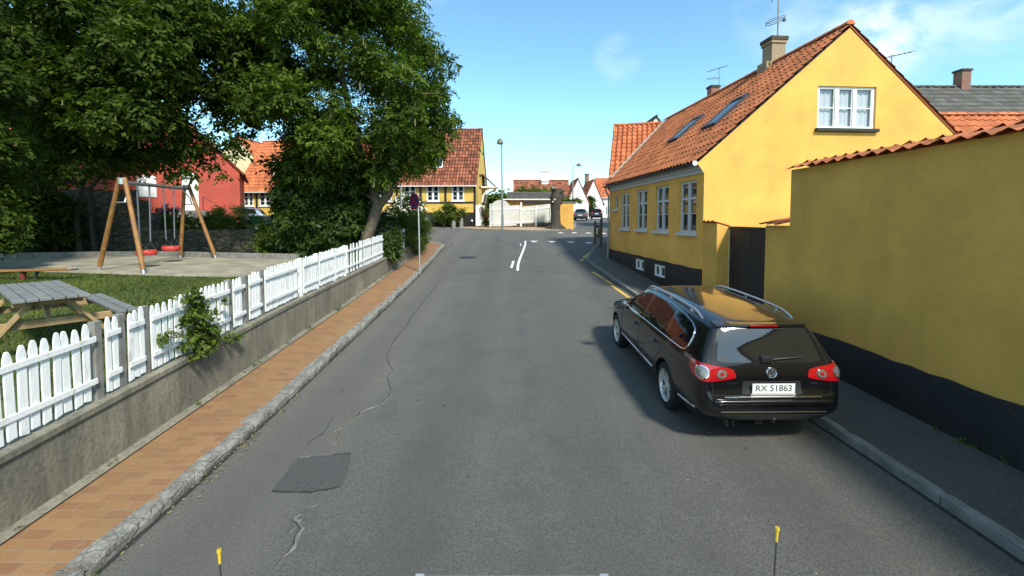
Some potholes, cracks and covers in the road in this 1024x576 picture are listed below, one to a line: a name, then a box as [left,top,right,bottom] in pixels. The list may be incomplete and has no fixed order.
crack [308,283,438,449]
crack [276,498,322,568]
